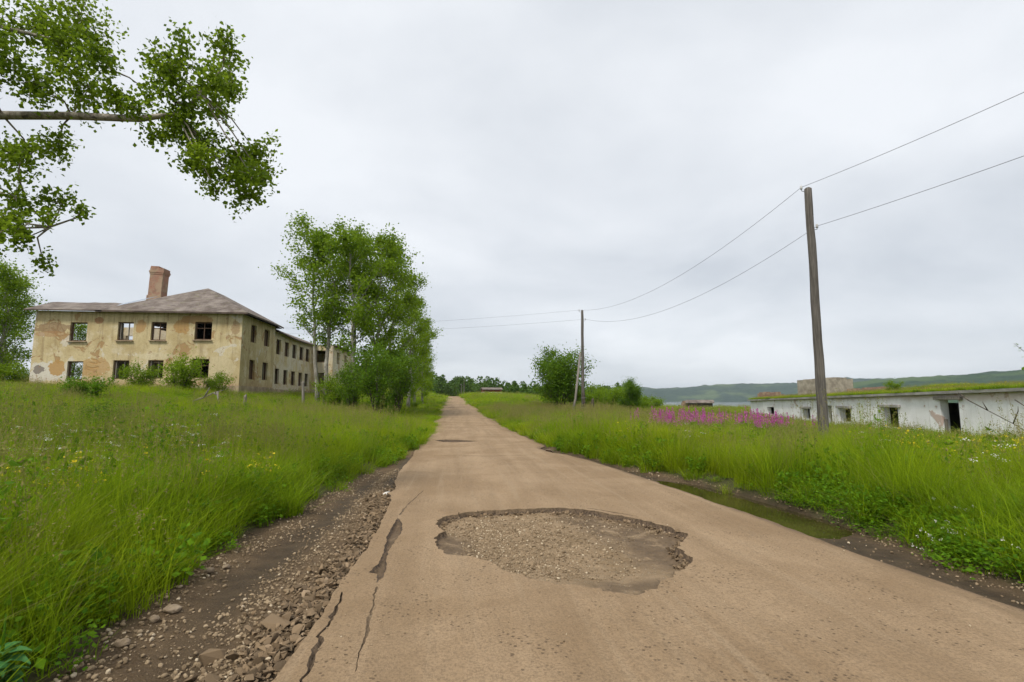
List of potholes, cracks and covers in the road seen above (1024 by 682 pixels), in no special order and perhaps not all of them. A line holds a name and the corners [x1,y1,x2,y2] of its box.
crack [299,587,378,682]
pothole [434,508,693,595]
